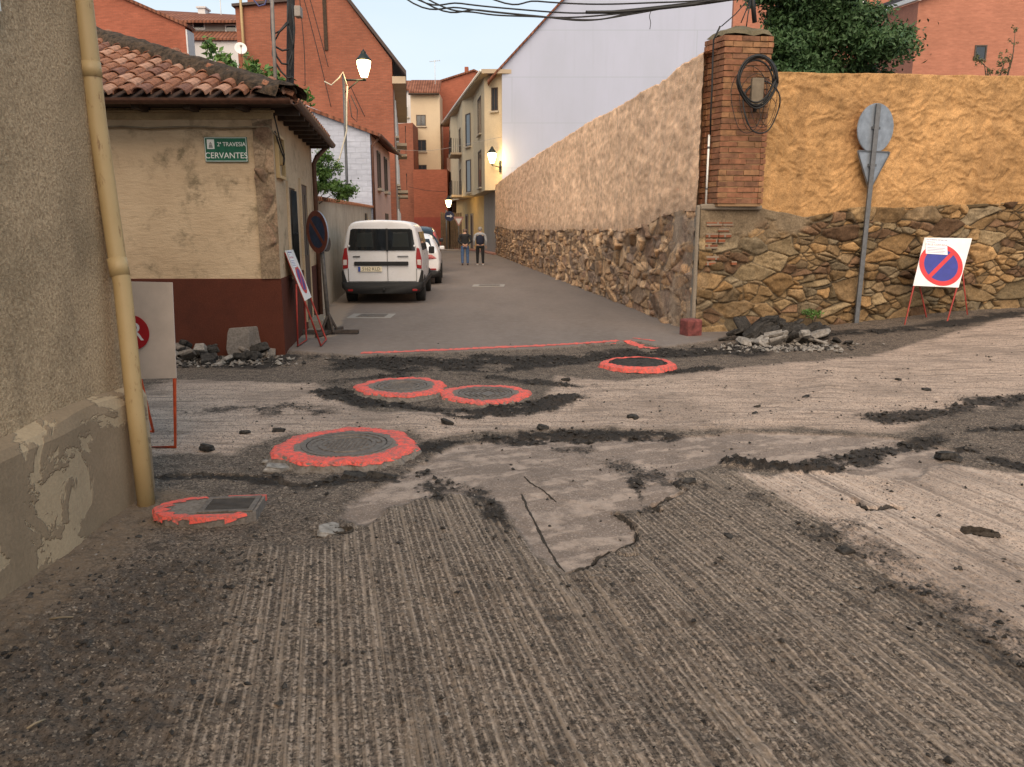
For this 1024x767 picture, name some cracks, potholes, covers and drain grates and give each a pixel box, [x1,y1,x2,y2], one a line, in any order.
manhole cover [440,385,533,408]
manhole cover [351,377,448,403]
manhole cover [264,427,422,474]
crack [521,477,682,572]
manhole cover [598,356,677,374]
